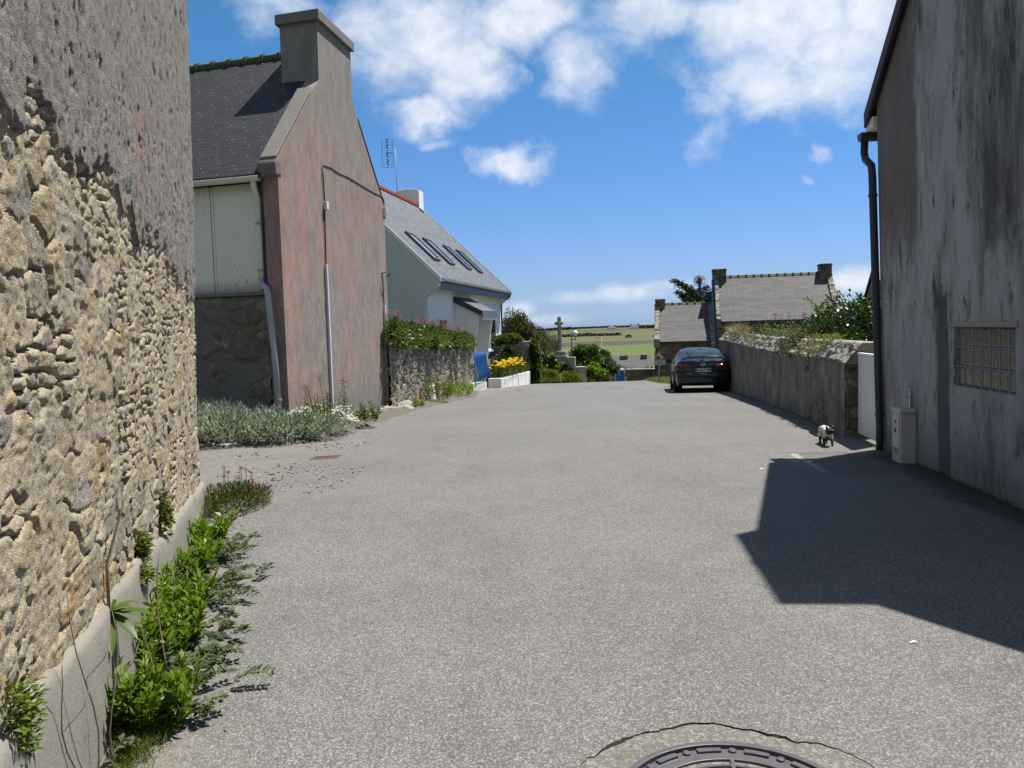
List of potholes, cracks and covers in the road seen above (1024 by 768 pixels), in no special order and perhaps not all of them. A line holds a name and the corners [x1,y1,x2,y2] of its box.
manhole cover [629,741,825,768]
